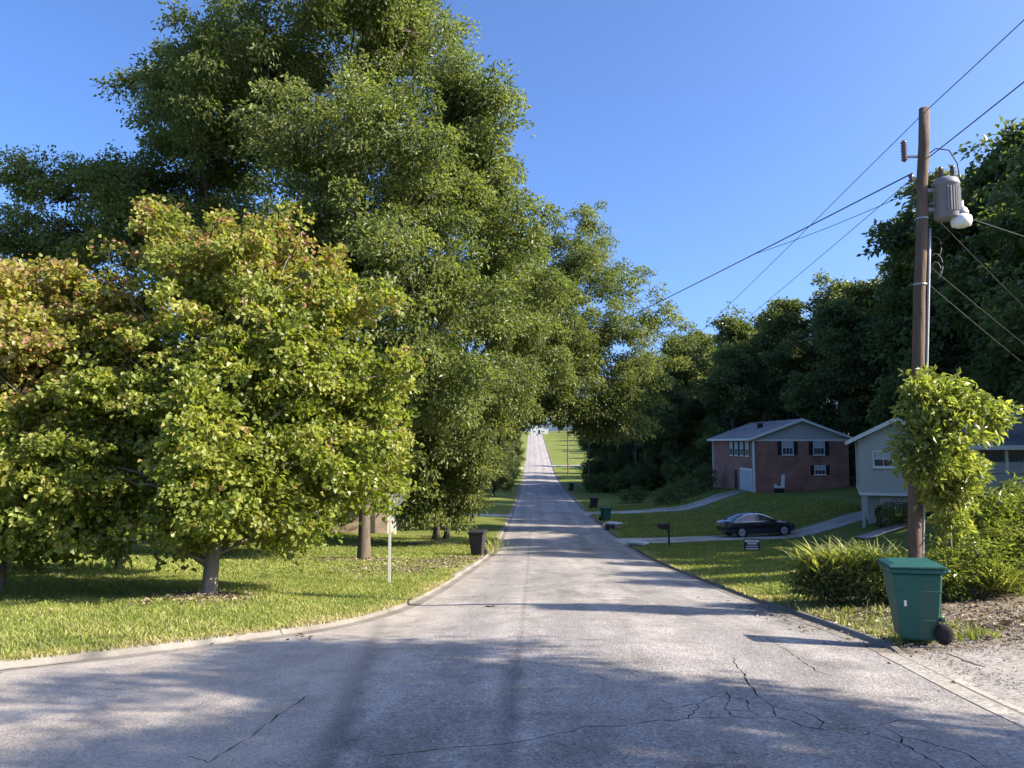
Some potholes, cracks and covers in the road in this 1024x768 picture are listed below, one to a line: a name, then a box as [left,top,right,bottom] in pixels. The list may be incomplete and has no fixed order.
crack [363,658,988,768]
crack [190,696,305,763]
